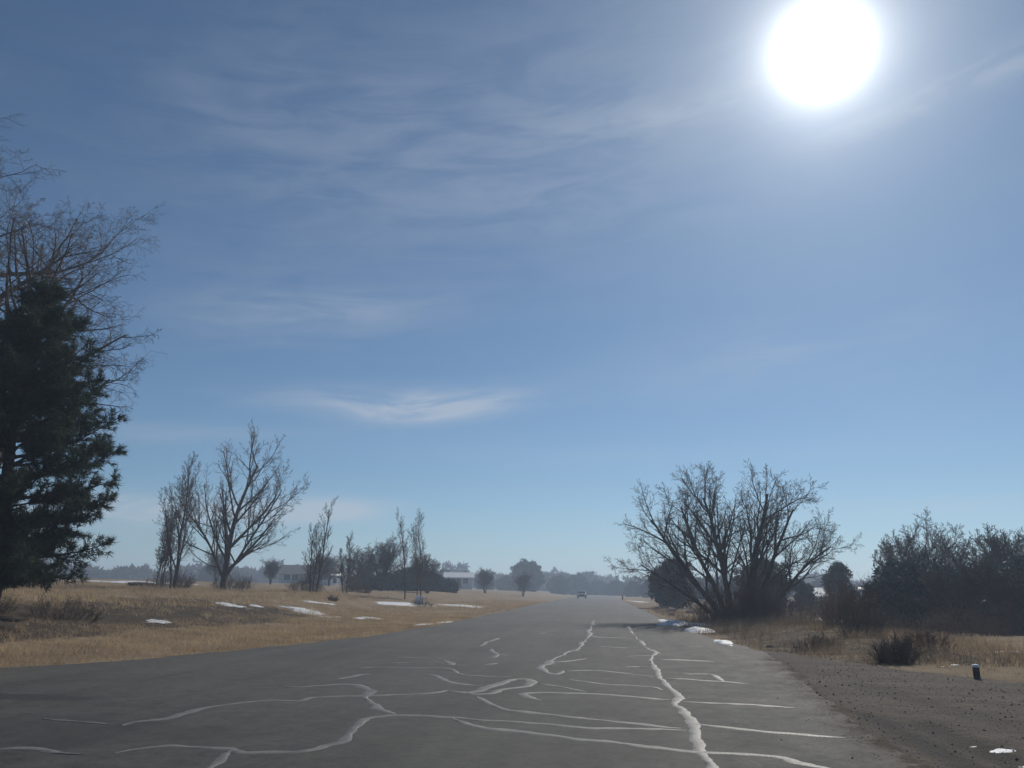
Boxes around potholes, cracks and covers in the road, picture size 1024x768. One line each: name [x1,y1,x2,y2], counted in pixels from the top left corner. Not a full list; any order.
crack [0,747,82,755]
crack [592,636,715,667]
